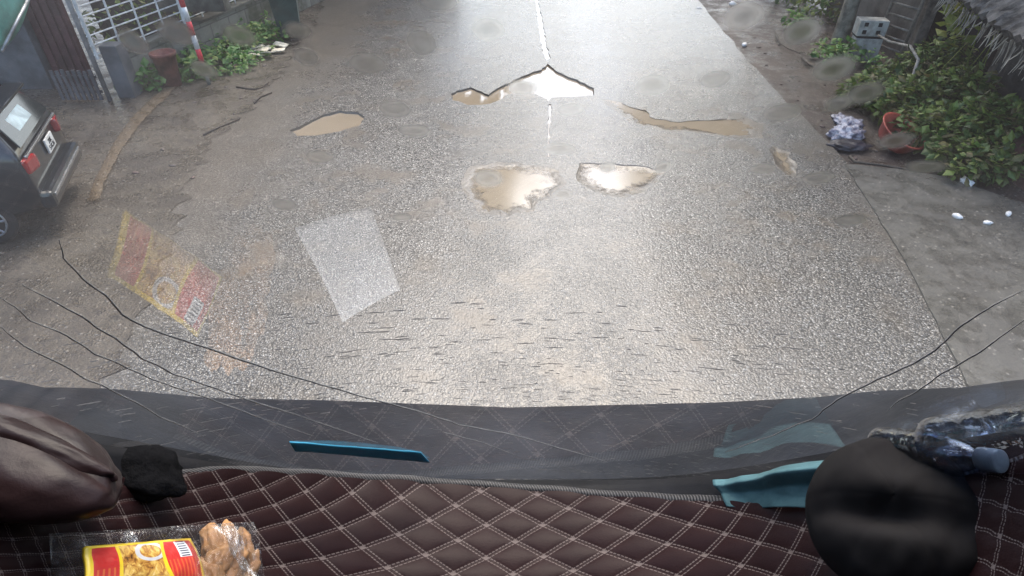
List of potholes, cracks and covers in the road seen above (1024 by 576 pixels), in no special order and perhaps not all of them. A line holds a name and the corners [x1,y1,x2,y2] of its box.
pothole [461,162,567,217]
pothole [290,110,365,136]
pothole [451,64,594,105]
pothole [576,163,666,198]
